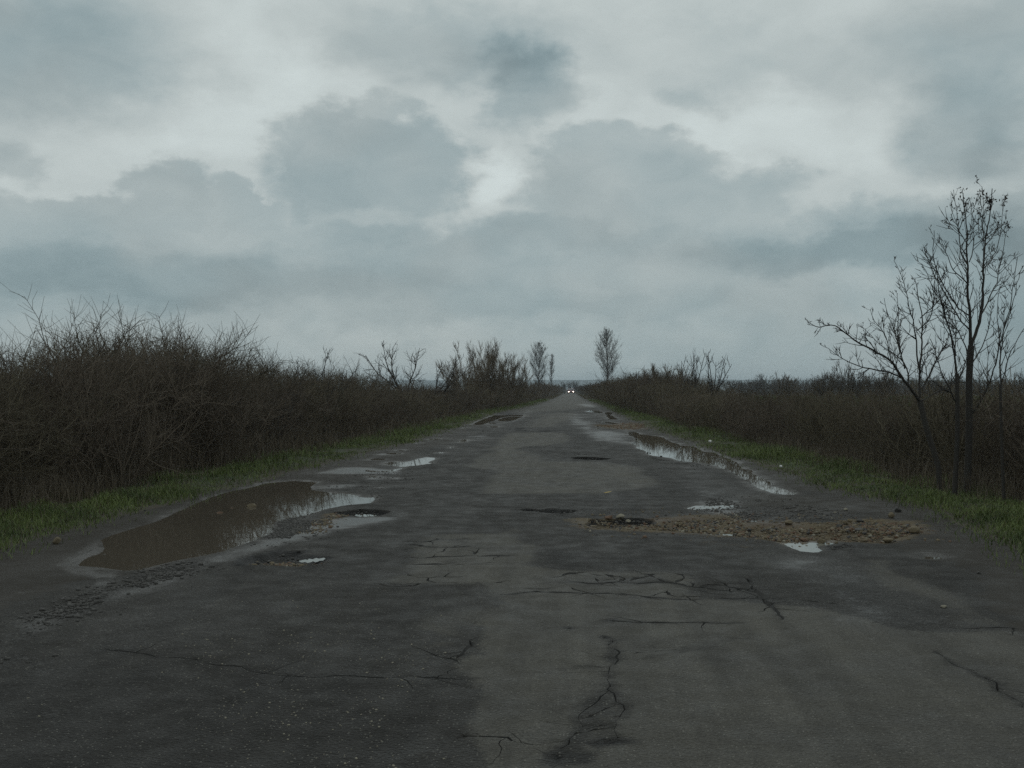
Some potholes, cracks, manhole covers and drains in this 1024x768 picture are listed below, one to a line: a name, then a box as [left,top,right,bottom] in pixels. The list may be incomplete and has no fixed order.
crack [419,641,483,663]
crack [496,570,815,620]
pothole [331,509,392,517]
crack [393,539,501,587]
crack [938,653,1023,705]
crack [553,640,669,745]
pothole [583,518,657,529]
pothole [67,479,381,571]
pothole [625,431,803,495]
